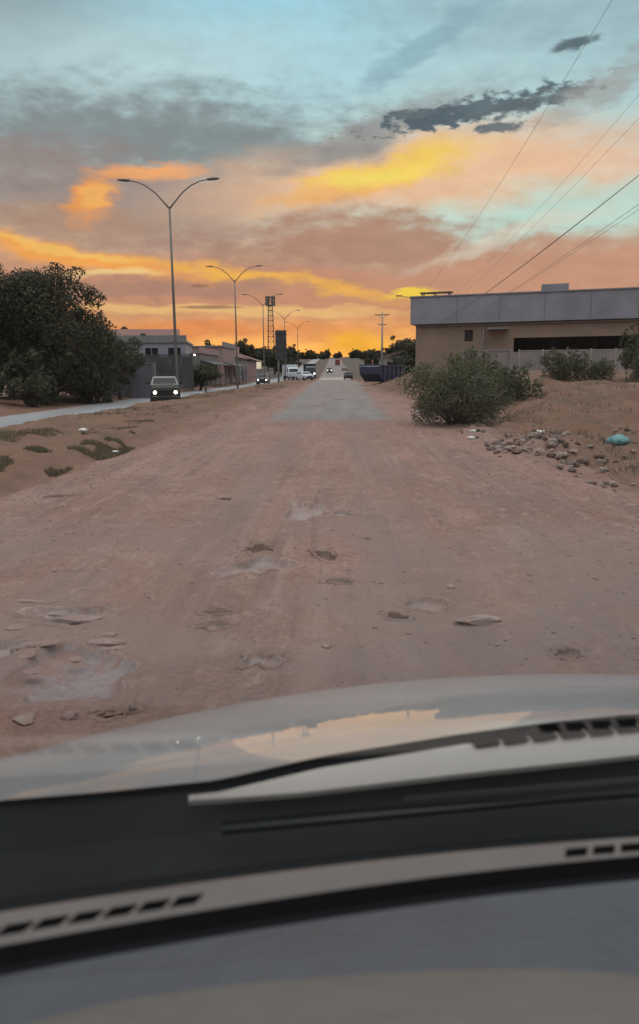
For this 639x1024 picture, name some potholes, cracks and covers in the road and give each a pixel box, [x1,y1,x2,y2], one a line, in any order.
pothole [547,645,589,662]
pothole [308,548,344,564]
pothole [0,631,162,718]
pothole [236,648,289,671]
pothole [393,594,459,614]
pothole [189,618,239,632]
pothole [231,540,281,555]
pothole [0,601,127,629]
pothole [276,498,337,525]
pothole [194,605,241,617]
pothole [377,610,415,622]
pothole [318,576,360,585]
